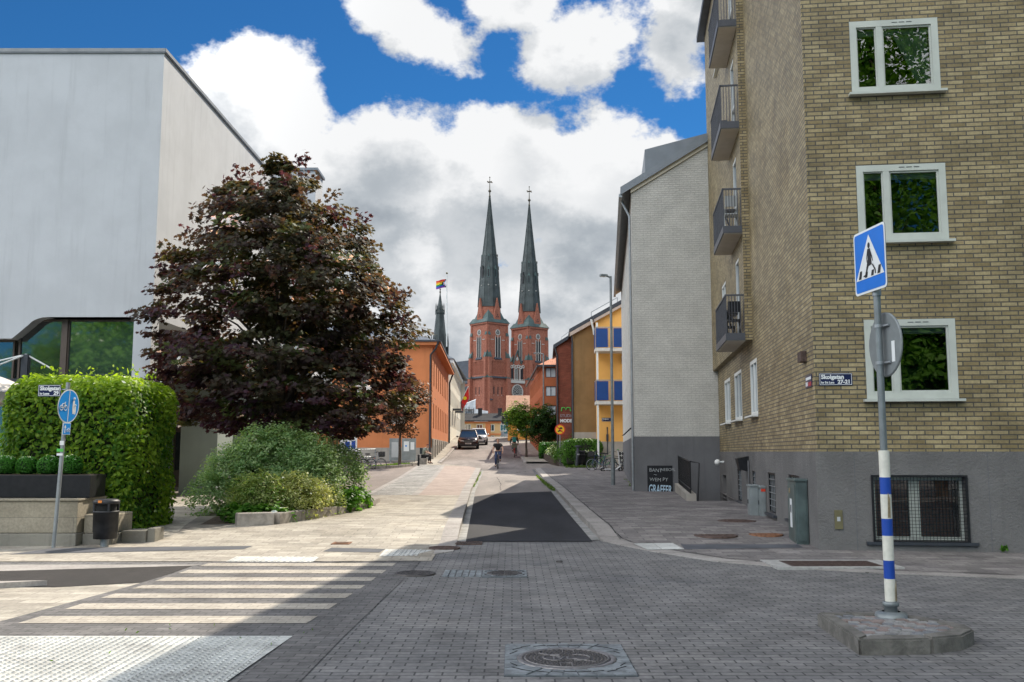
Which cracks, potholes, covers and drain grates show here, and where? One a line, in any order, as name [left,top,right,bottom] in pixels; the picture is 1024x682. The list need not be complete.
manhole cover [504,643,638,677]
manhole cover [482,570,527,578]
